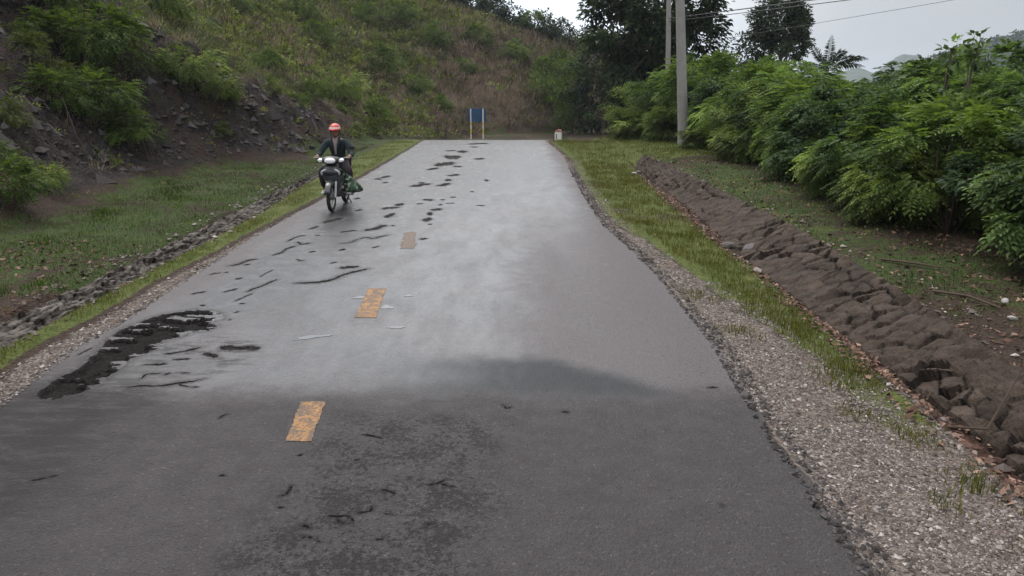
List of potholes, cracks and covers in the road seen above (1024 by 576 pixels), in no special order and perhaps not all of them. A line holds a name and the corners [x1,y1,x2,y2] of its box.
crack [427,478,455,487]
crack [210,235,366,301]
pothole [34,309,224,400]
